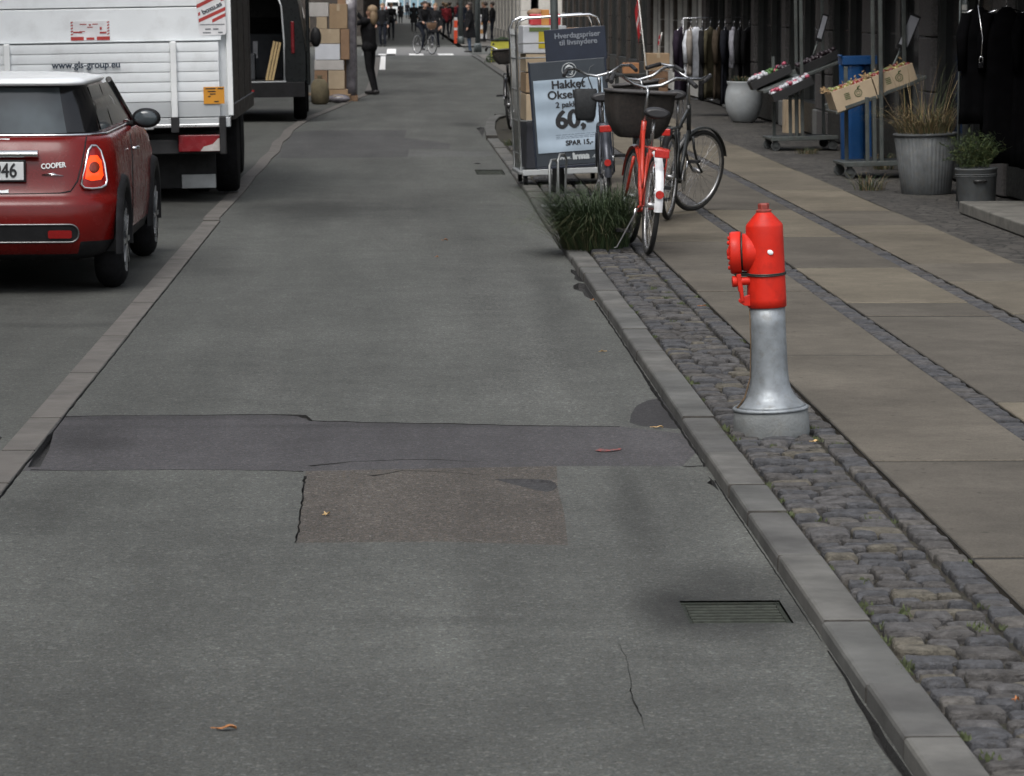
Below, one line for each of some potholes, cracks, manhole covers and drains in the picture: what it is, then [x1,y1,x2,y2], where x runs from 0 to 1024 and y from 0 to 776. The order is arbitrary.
drain grate [680,602,791,624]
crack [294,459,477,543]
